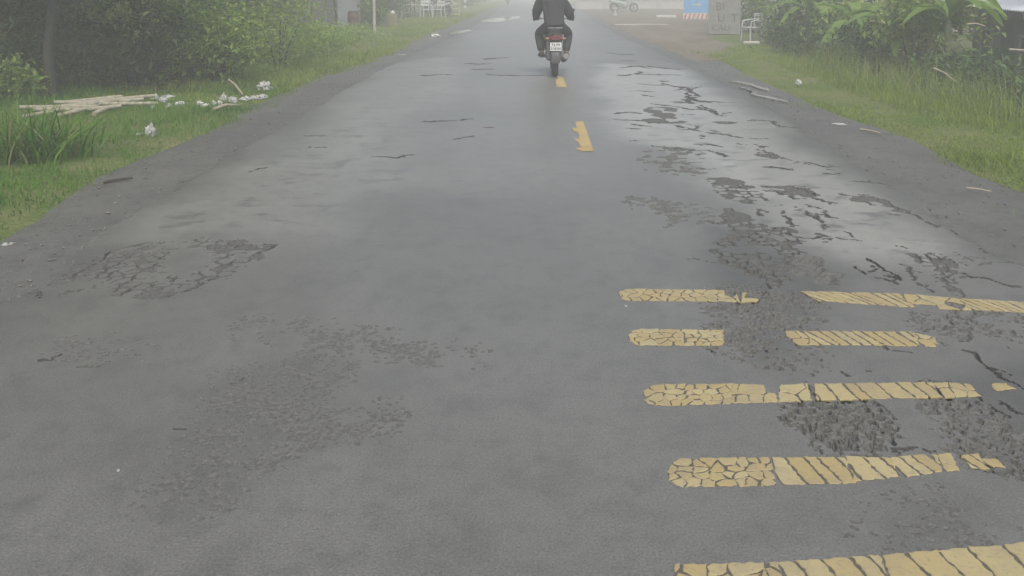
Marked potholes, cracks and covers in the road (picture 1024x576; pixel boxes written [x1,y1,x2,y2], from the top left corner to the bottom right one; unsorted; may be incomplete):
crack [839,245,1024,555]
crack [419,57,545,76]
crack [2,237,278,302]
crack [612,53,953,377]
crack [423,119,494,140]
pothole [776,381,906,459]
